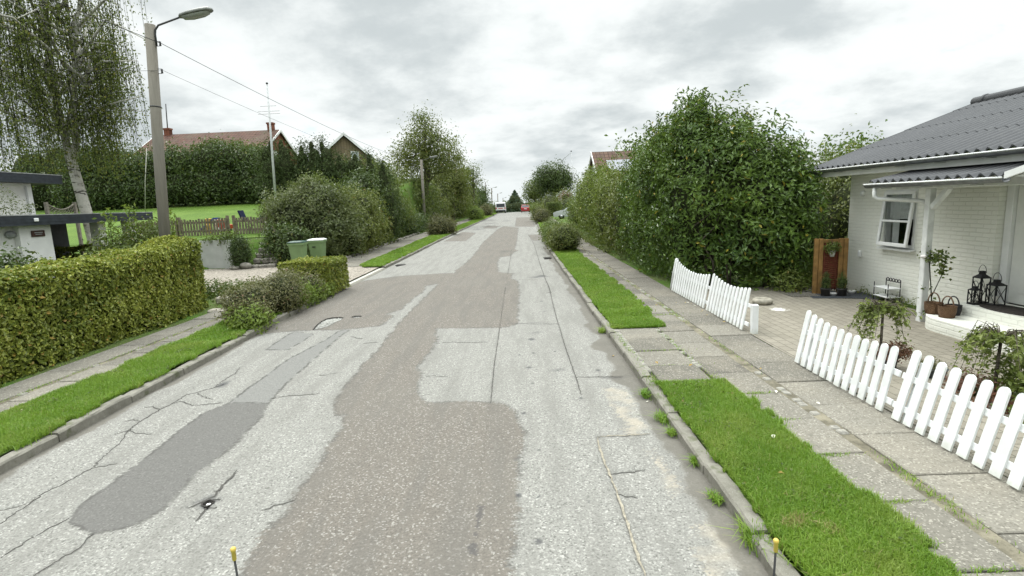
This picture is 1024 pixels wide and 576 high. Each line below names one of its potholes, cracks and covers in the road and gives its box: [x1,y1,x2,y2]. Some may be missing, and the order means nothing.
crack [0,367,240,576]
